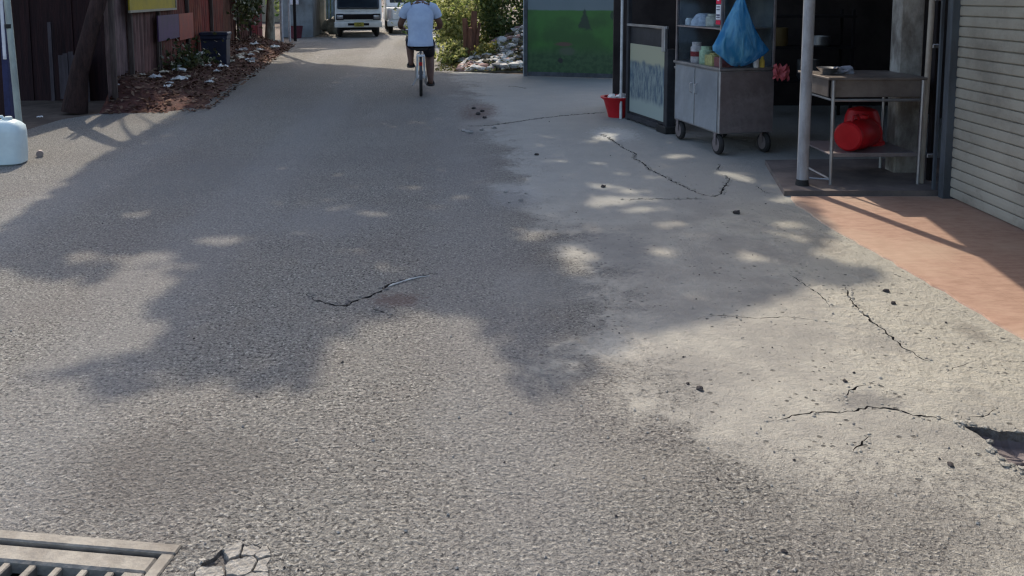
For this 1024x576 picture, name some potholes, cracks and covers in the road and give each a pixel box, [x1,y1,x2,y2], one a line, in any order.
drain grate [0,530,182,576]
crack [698,276,968,373]
crack [307,273,438,318]
crack [468,112,605,126]
crack [765,381,1000,453]
crack [601,134,732,201]
pothole [953,417,1024,475]
